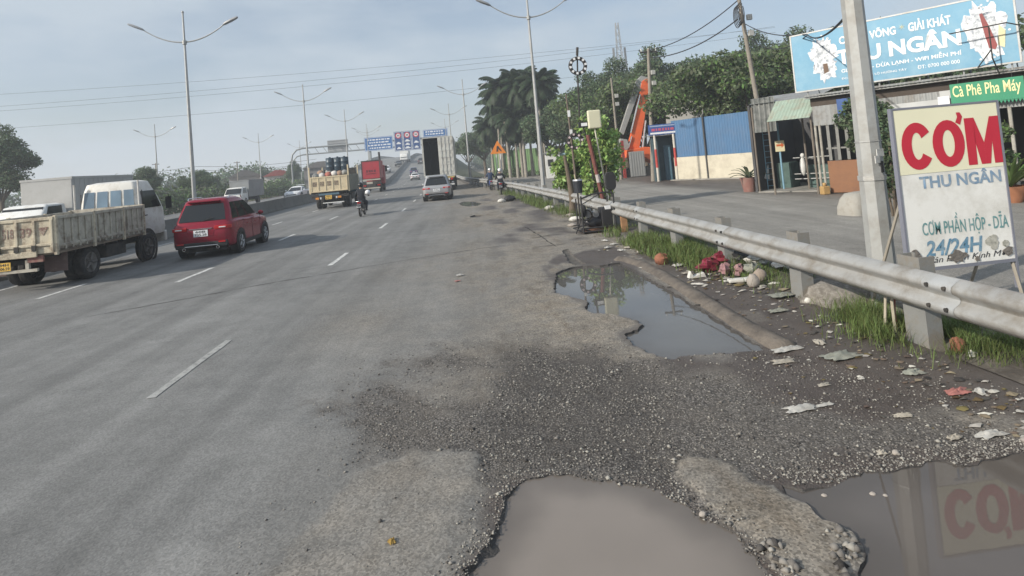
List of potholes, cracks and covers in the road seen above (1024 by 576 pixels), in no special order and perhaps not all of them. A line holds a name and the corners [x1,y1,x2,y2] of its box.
pothole [464,473,768,576]
pothole [553,262,763,359]
pothole [782,453,1024,576]
